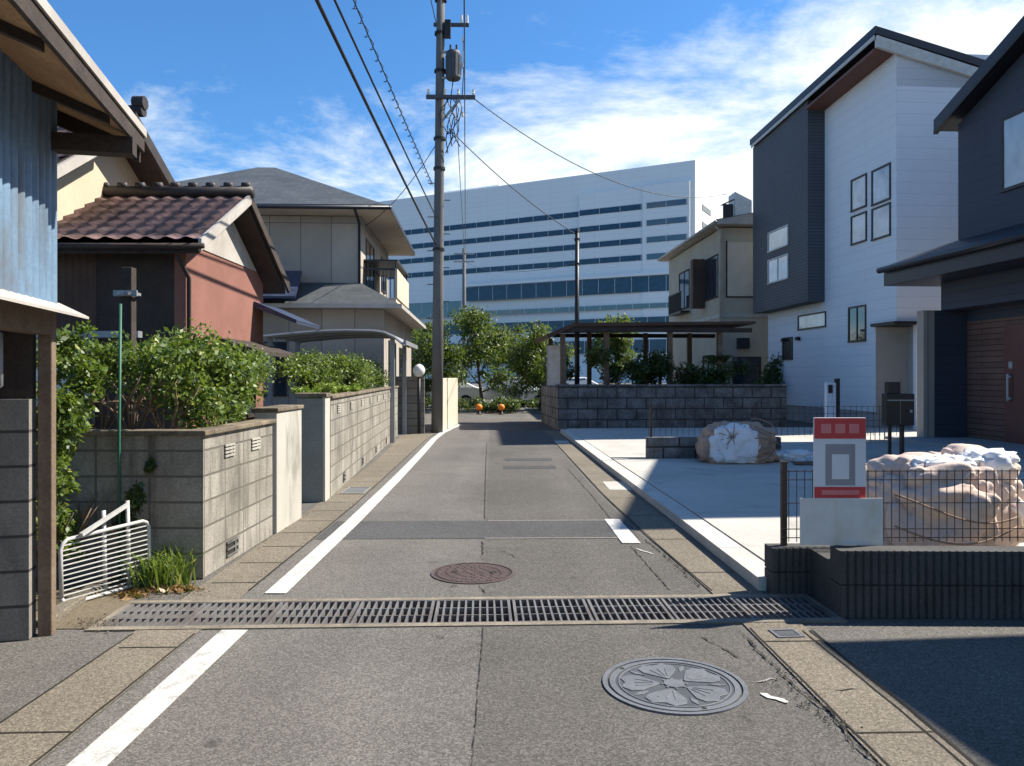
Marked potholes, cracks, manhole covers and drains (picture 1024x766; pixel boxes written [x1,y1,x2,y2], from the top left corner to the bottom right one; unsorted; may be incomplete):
drain grate [586,598,676,621]
manhole cover [602,657,748,716]
manhole cover [431,562,515,584]
drain grate [96,603,208,627]
drain grate [733,596,836,619]
drain grate [511,598,595,622]
drain grate [349,600,436,624]
crack [701,630,881,766]
drain grate [432,599,513,623]
drain grate [181,602,285,626]
drain grate [265,601,360,625]
drain grate [659,597,756,620]
